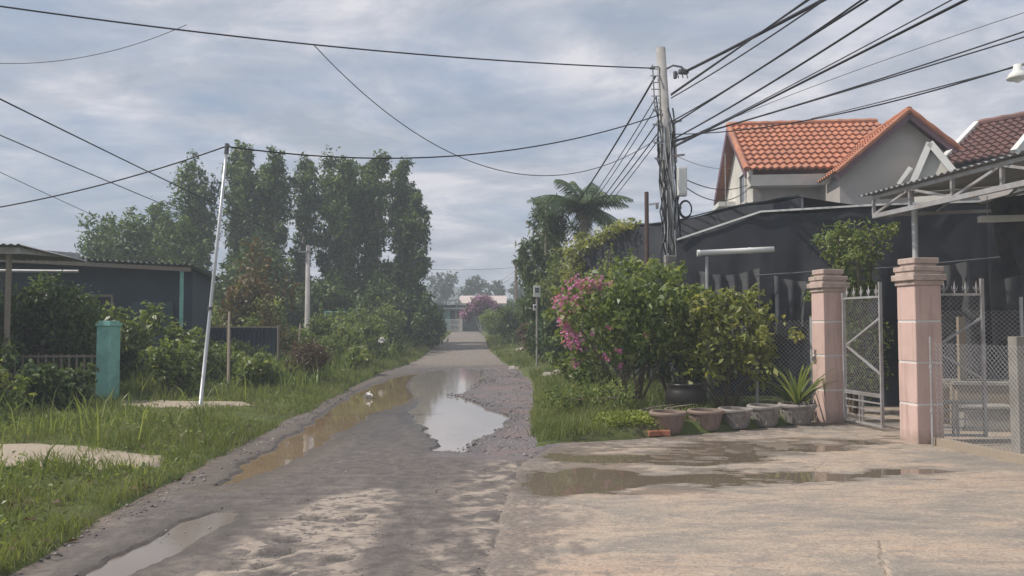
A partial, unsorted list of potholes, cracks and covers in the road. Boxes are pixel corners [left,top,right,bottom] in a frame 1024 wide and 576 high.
pothole [205,373,421,487]
crack [876,540,892,576]
pothole [75,509,254,576]
pothole [406,366,513,452]
